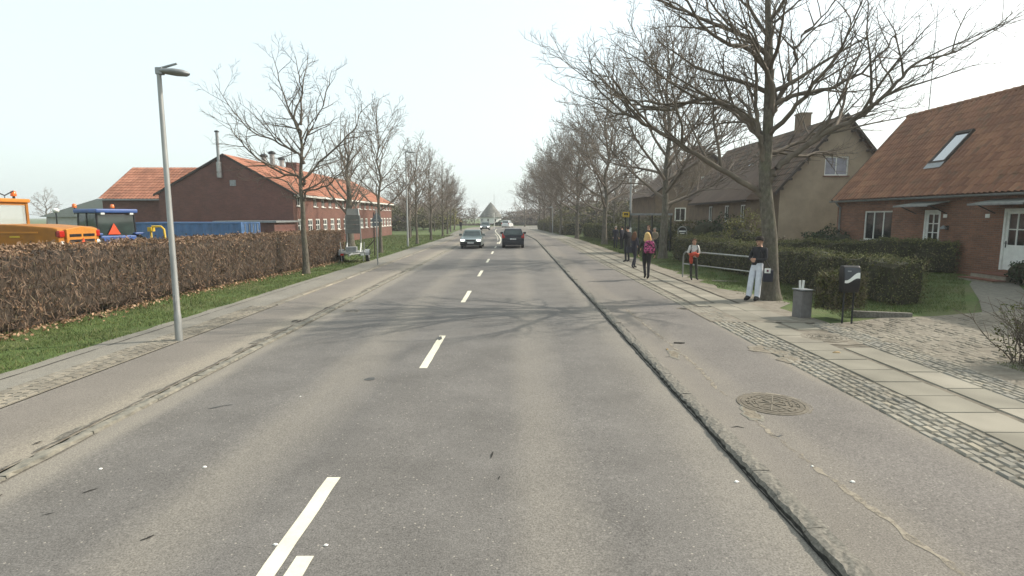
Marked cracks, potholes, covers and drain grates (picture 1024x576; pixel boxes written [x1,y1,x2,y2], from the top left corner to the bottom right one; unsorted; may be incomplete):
manhole cover [736,393,810,416]
